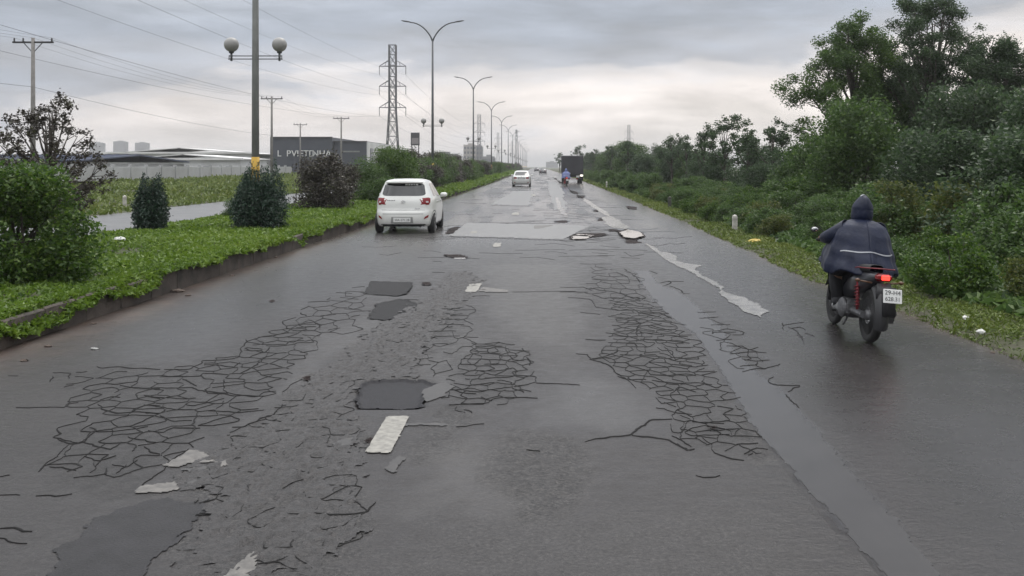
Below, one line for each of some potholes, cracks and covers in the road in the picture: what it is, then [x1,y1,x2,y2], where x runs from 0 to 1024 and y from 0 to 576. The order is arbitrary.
crack [16,182,800,569]
